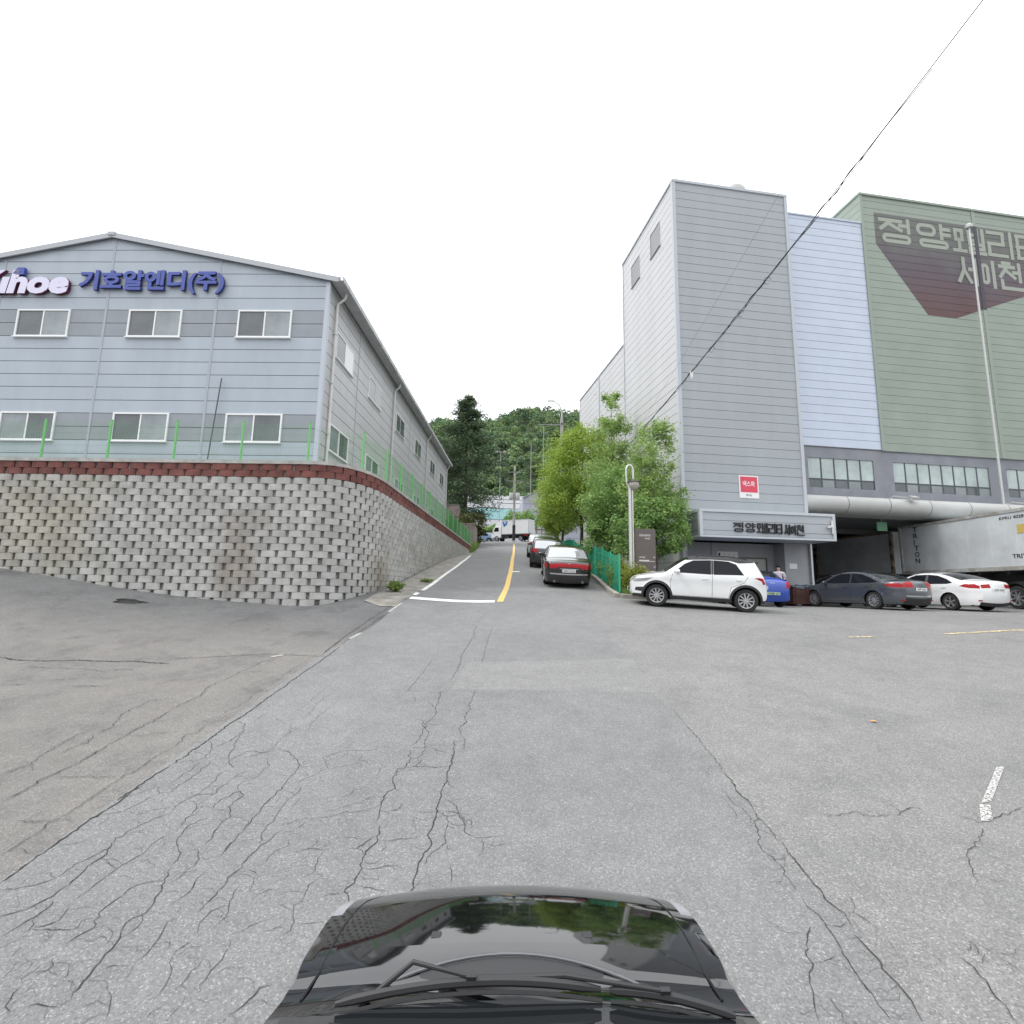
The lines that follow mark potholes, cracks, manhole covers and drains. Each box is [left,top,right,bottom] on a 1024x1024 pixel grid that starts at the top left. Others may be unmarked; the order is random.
crack [671,707,938,1024]
crack [0,605,400,856]
crack [344,621,505,901]
crack [1,691,383,1022]
crack [956,935,1023,1019]
crack [946,806,1024,882]
